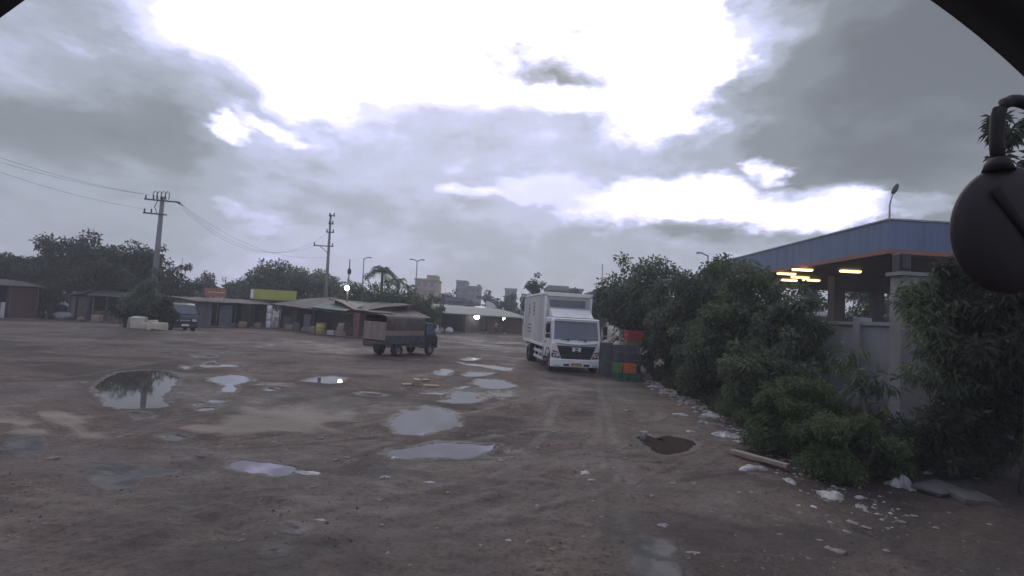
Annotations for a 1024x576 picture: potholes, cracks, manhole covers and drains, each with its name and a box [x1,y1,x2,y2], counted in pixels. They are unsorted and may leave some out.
pothole [467,379,519,390]
pothole [628,433,705,457]
pothole [435,390,486,404]
pothole [216,455,309,479]
pothole [374,440,503,461]
pothole [619,535,689,576]
pothole [79,460,185,491]
pothole [202,374,258,393]
pothole [84,369,186,410]
pothole [382,405,465,437]
